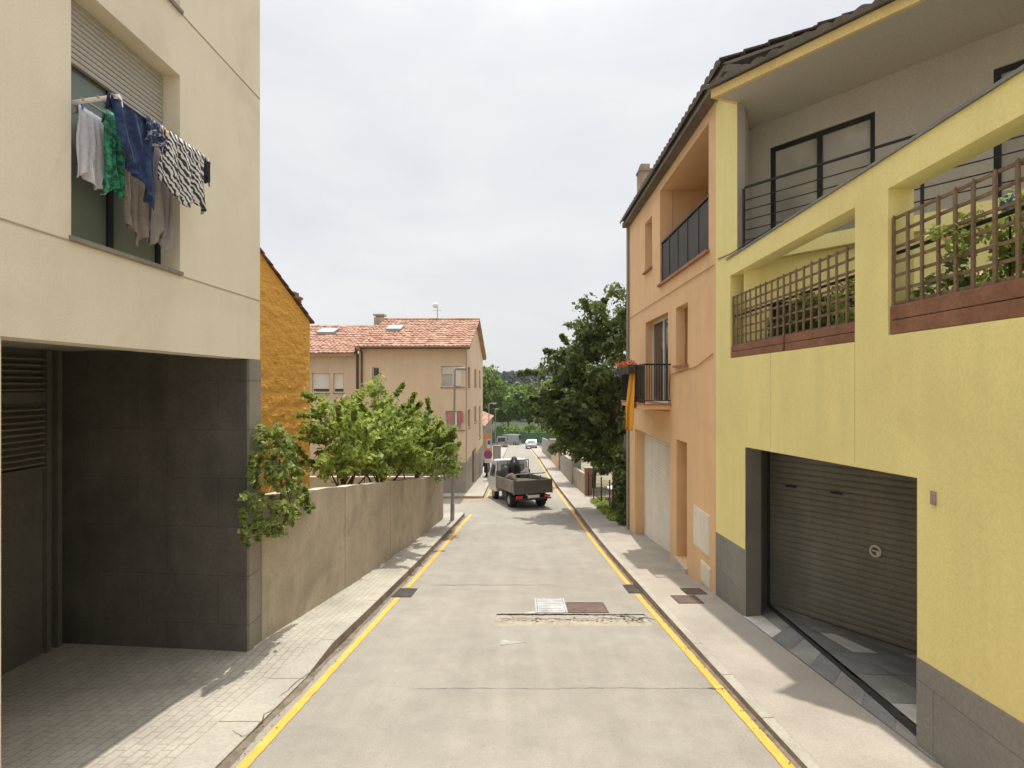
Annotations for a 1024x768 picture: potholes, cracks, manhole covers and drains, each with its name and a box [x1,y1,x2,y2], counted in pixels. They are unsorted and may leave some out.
manhole cover [670,595,704,604]
drain grate [392,588,418,597]
drain grate [623,585,641,593]
manhole cover [565,602,609,615]
